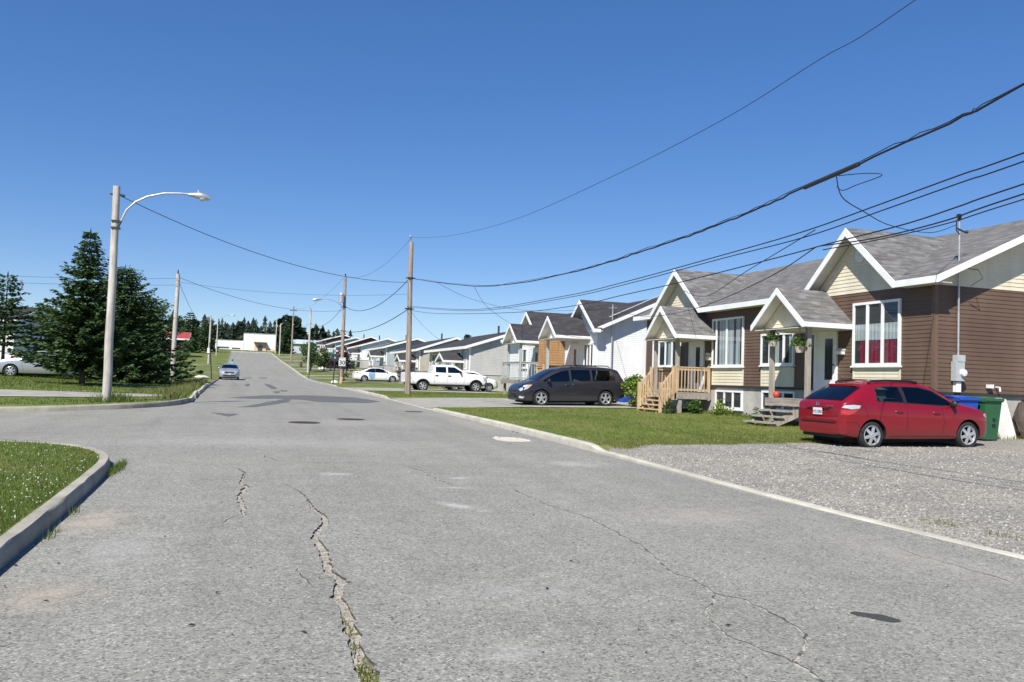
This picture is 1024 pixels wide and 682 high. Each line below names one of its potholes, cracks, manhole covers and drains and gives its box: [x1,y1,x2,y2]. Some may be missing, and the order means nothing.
crack [282,483,380,682]
crack [513,489,824,682]
crack [224,467,250,522]
